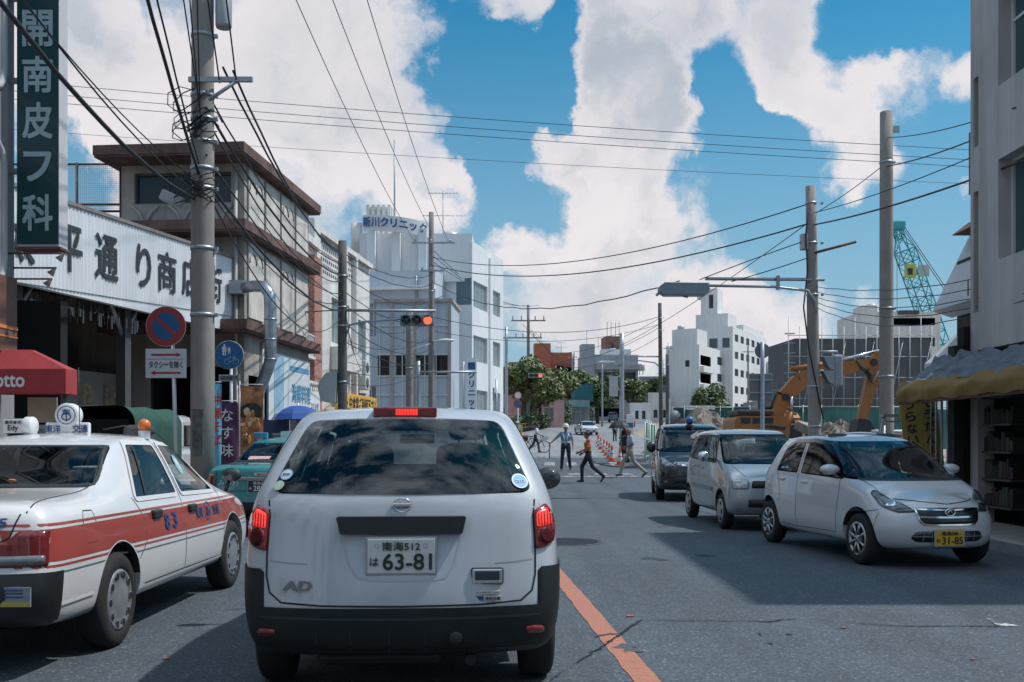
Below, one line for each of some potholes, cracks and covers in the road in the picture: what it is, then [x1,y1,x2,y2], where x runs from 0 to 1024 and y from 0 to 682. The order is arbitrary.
crack [549,619,736,681]
